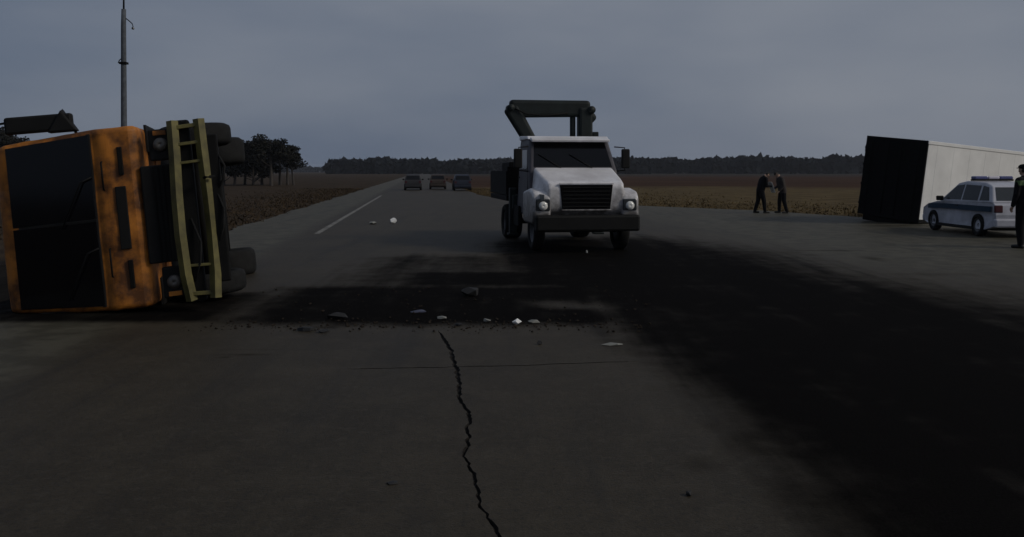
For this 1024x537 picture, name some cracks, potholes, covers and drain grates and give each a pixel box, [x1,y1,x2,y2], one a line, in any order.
crack [360,331,628,537]
